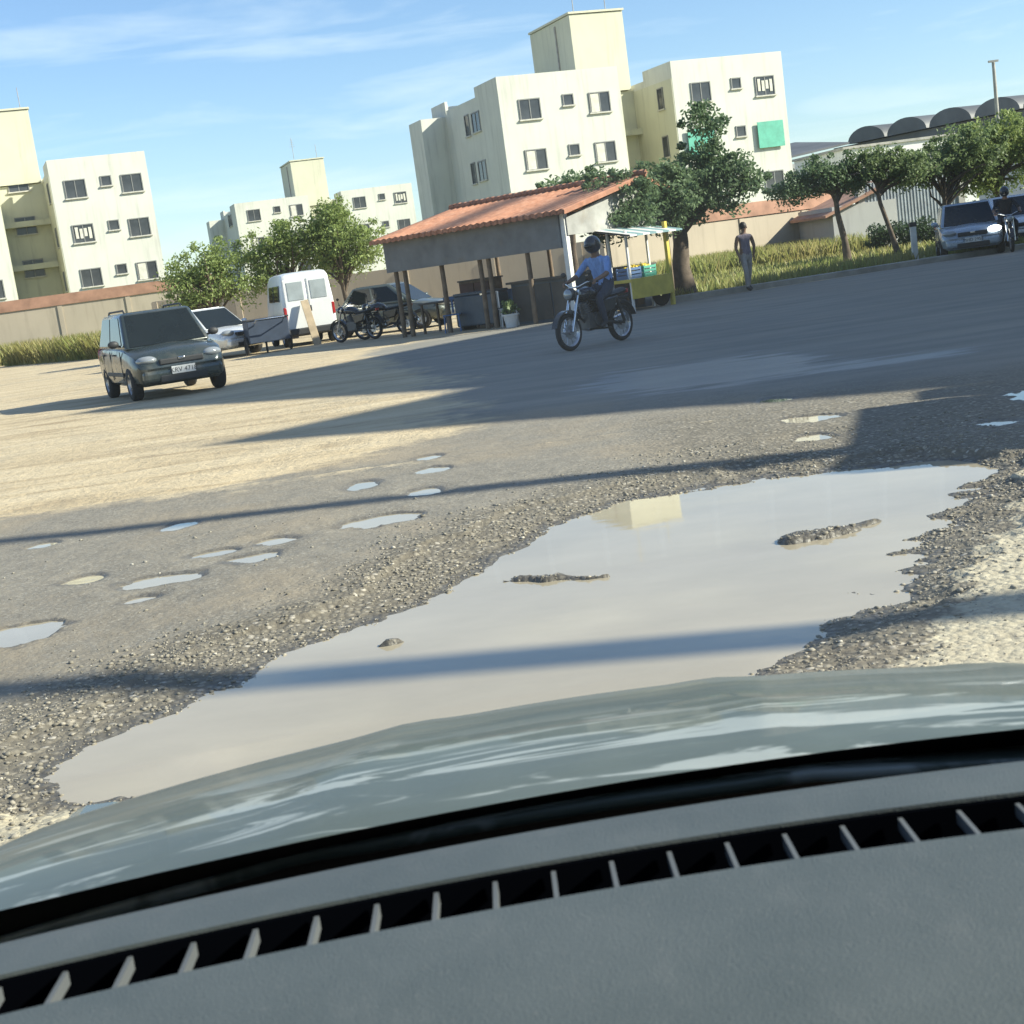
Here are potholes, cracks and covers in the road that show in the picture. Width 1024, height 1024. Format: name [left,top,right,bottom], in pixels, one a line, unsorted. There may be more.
pothole [791,432,842,442]
pothole [0,445,1024,830]
pothole [966,417,1024,427]
pothole [778,412,849,424]
